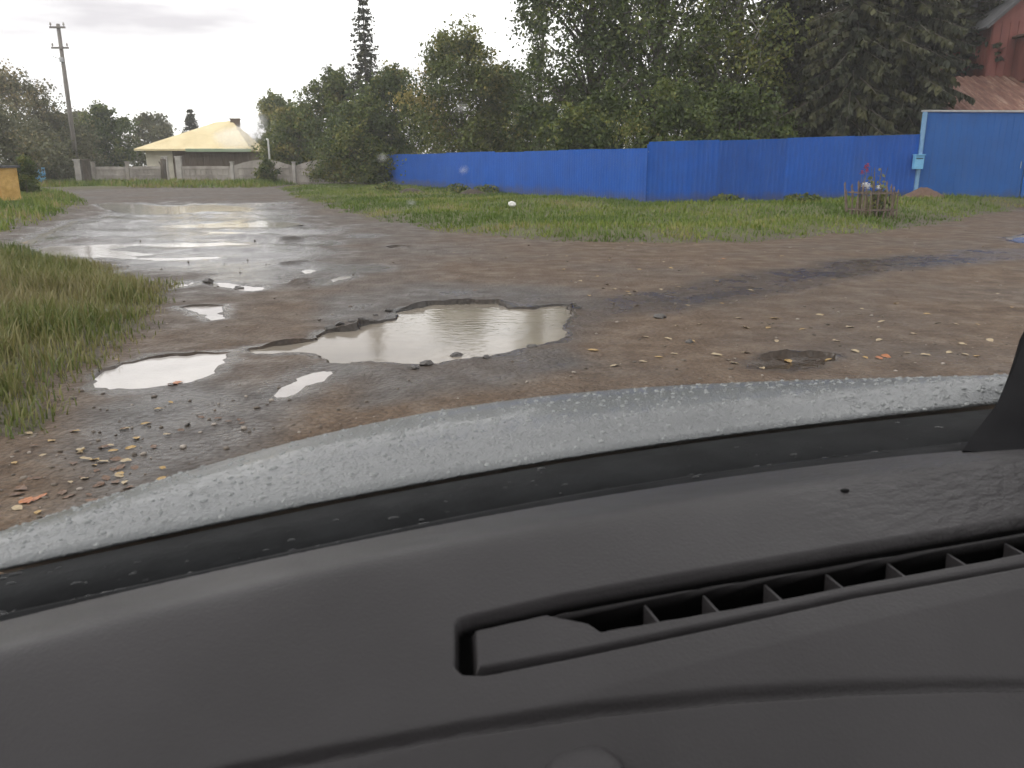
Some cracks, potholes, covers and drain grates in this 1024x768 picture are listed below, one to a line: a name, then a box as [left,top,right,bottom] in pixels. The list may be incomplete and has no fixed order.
pothole [746,349,838,369]
pothole [181,304,227,321]
pothole [244,298,575,364]
pothole [90,352,230,390]
